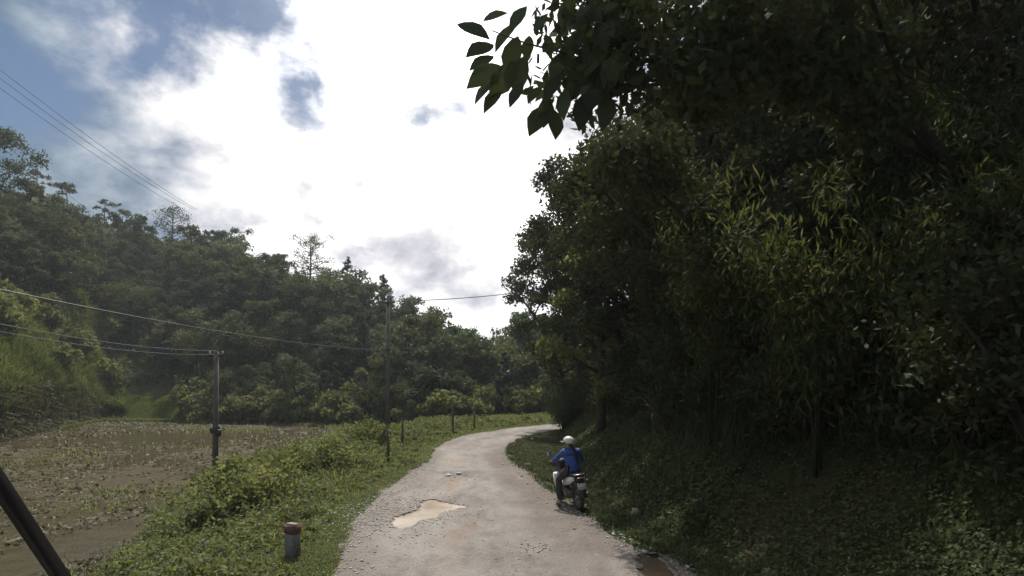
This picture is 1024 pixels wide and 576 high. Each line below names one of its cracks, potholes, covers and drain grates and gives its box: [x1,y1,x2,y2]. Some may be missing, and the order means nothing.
pothole [389,499,467,529]
pothole [633,553,685,576]
